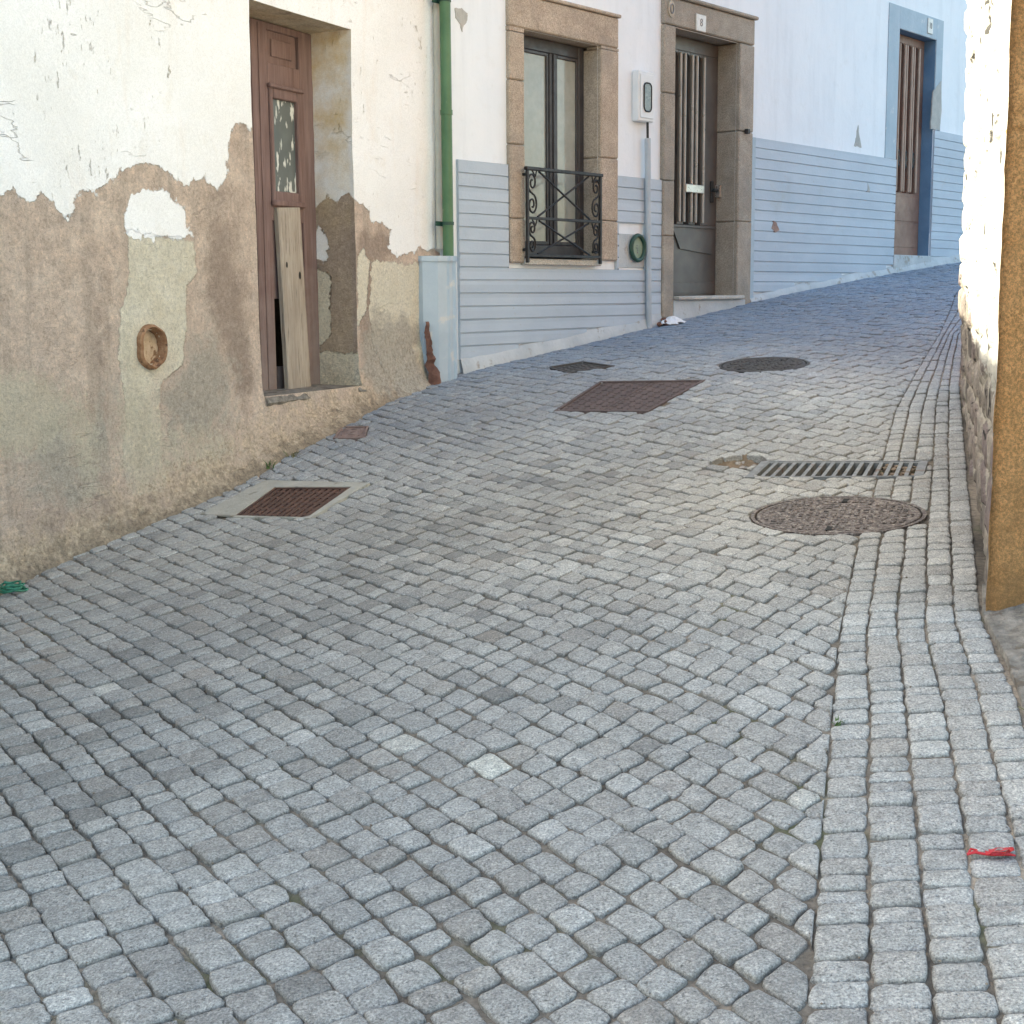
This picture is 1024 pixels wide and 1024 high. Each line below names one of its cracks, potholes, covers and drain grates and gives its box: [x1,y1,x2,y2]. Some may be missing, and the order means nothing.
manhole cover [751,496,927,536]
drain grate [745,461,928,480]
utility cover [554,380,705,414]
utility cover [333,426,369,441]
manhole cover [719,357,809,373]
drain grate [201,480,370,521]
utility cover [548,361,615,373]
